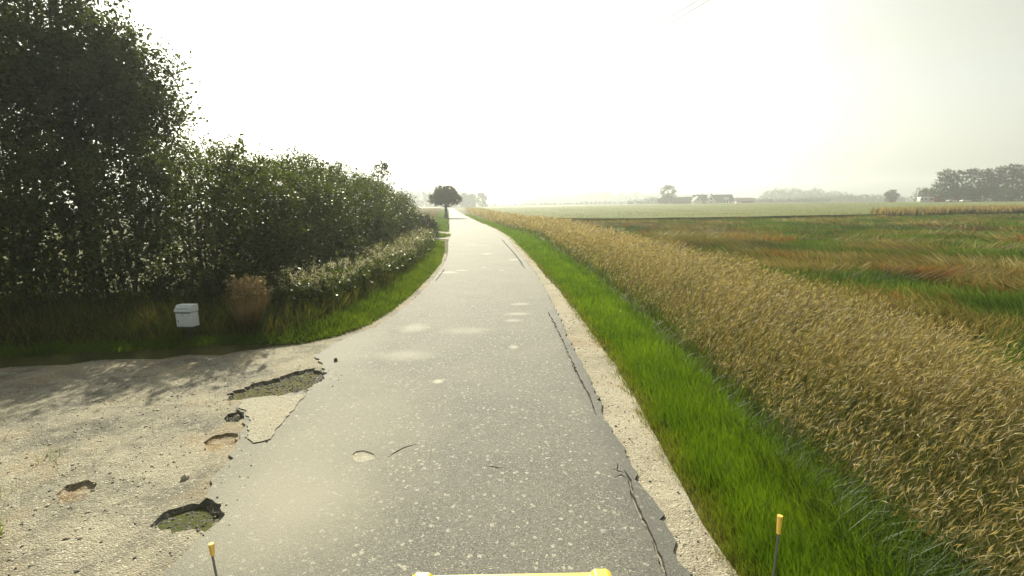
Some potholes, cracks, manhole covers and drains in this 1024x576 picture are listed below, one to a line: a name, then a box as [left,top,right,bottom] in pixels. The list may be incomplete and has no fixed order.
pothole [224,412,244,422]
pothole [226,368,327,401]
pothole [352,450,376,462]
pothole [203,433,238,451]
crack [548,312,597,415]
pothole [153,498,225,531]
pothole [56,480,97,503]
crack [614,463,667,576]
